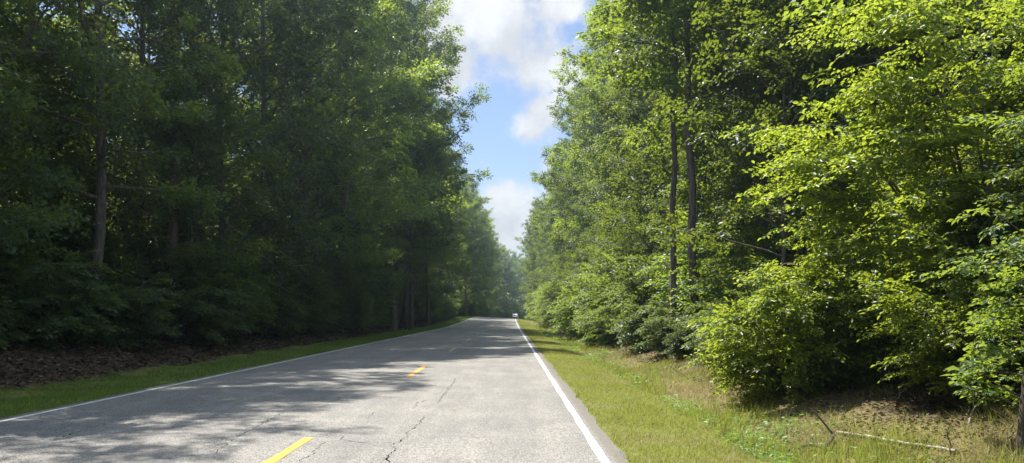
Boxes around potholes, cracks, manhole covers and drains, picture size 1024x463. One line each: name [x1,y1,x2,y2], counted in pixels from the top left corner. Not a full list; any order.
crack [299,378,456,463]
